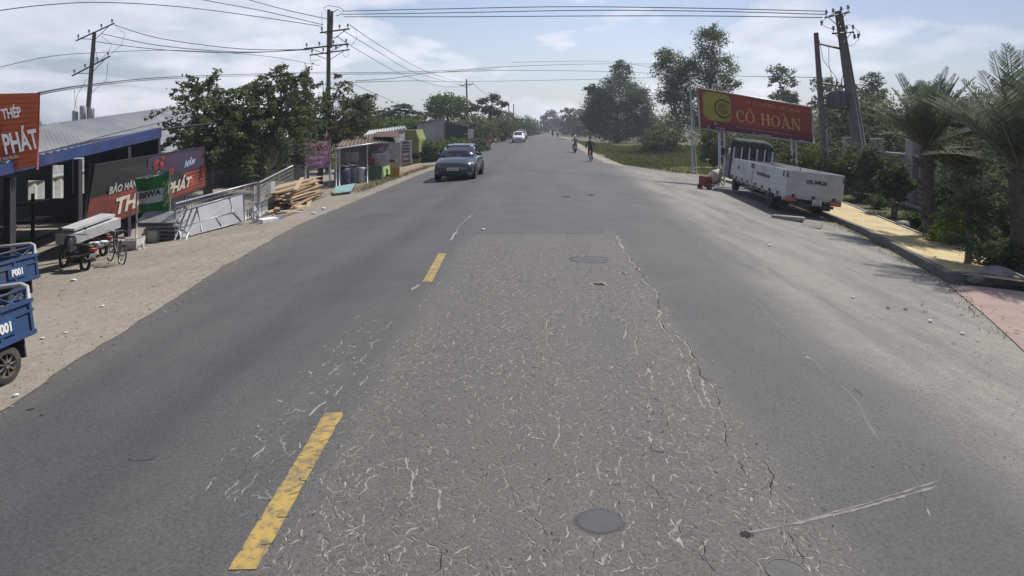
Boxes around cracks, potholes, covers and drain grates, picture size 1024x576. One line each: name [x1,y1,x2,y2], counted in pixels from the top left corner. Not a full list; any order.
crack [185,215,864,576]
